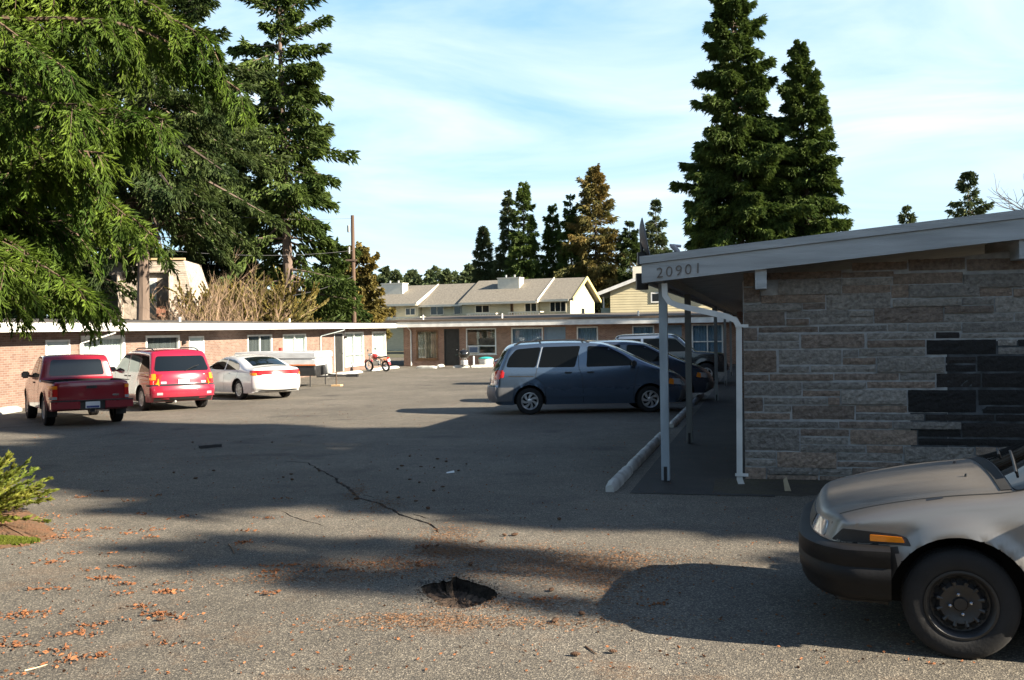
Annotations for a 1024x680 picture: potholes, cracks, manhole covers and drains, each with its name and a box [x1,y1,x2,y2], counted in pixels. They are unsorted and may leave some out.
crack [286,461,439,533]
pothole [408,573,506,613]
